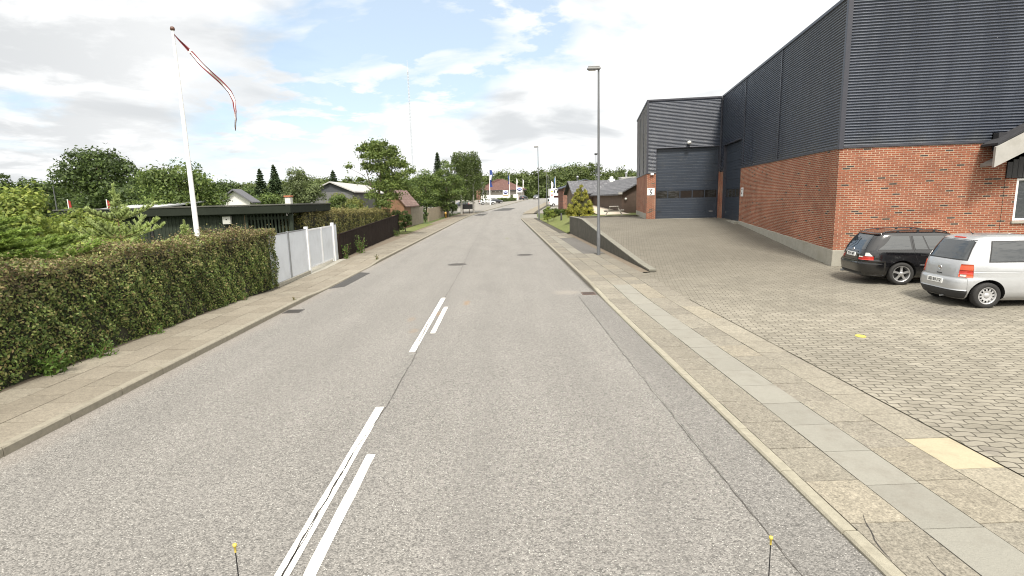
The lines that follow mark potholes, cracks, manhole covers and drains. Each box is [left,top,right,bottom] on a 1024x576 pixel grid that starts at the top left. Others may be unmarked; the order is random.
crack [863,515,889,557]
